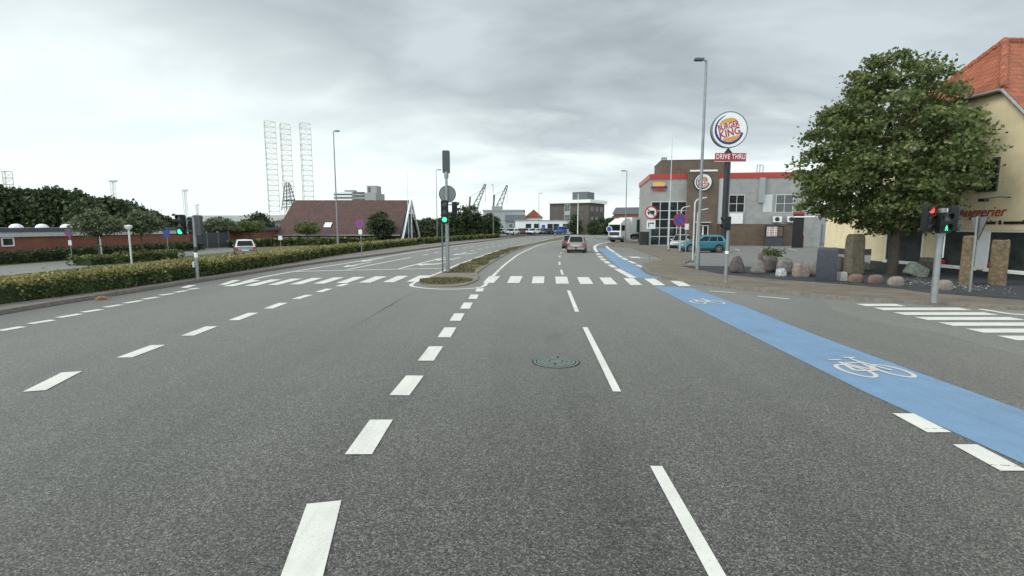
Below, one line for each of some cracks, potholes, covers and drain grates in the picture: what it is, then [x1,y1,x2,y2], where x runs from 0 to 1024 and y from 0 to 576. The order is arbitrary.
manhole cover [532,356,580,368]
